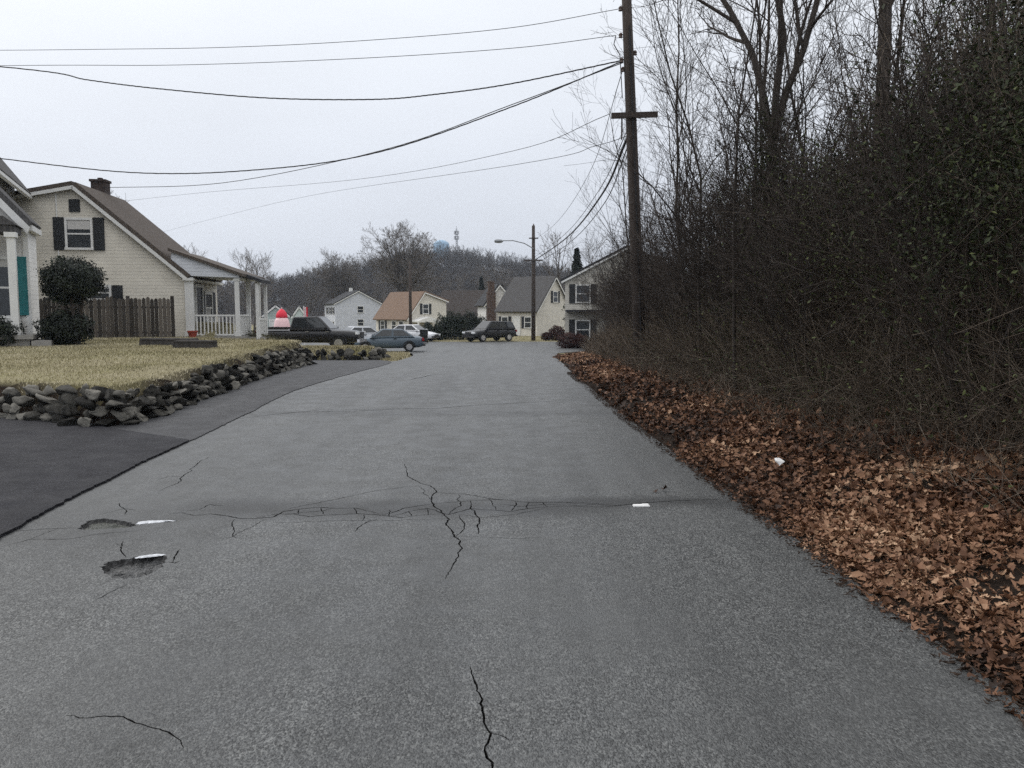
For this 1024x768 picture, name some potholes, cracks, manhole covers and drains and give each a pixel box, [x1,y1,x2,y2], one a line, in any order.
pothole [101,555,168,579]
crack [470,667,510,768]
pothole [78,518,136,530]
crack [171,464,722,579]
crack [66,715,184,748]
crack [9,503,139,557]
